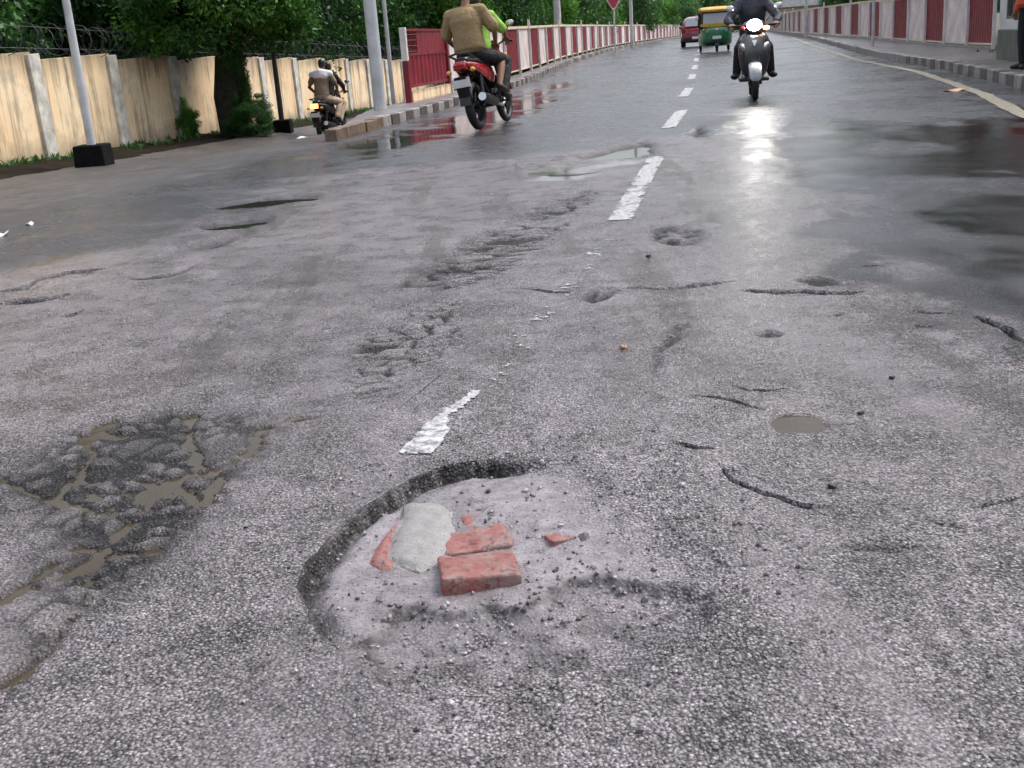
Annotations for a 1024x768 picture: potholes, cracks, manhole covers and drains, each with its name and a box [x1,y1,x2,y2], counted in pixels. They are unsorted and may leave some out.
pothole [769,413,830,434]
pothole [187,213,277,231]
pothole [296,452,739,698]
crack [972,315,1024,344]
crack [0,171,865,727]
pothole [579,286,621,304]
pothole [571,141,660,161]
pothole [201,192,328,210]
pothole [642,224,711,246]
